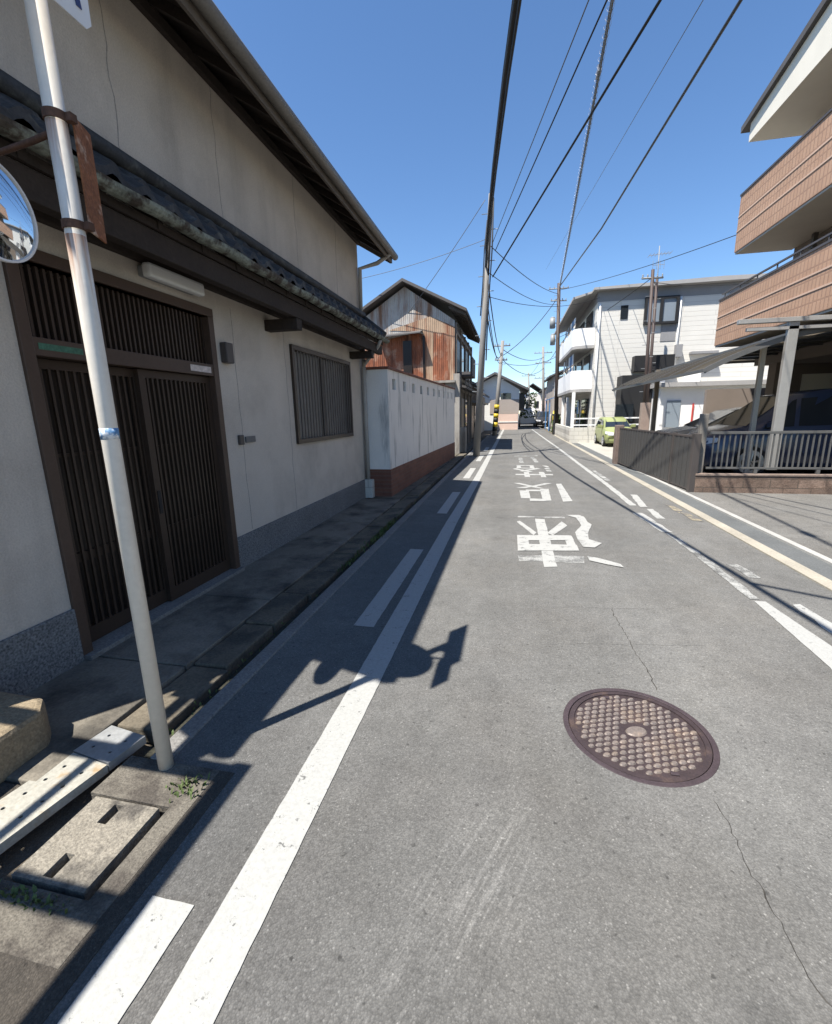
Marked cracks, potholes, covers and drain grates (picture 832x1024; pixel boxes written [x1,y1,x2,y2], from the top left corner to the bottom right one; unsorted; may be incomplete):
crack [713,800,832,1007]
crack [583,608,696,690]
manhole cover [563,688,720,788]
